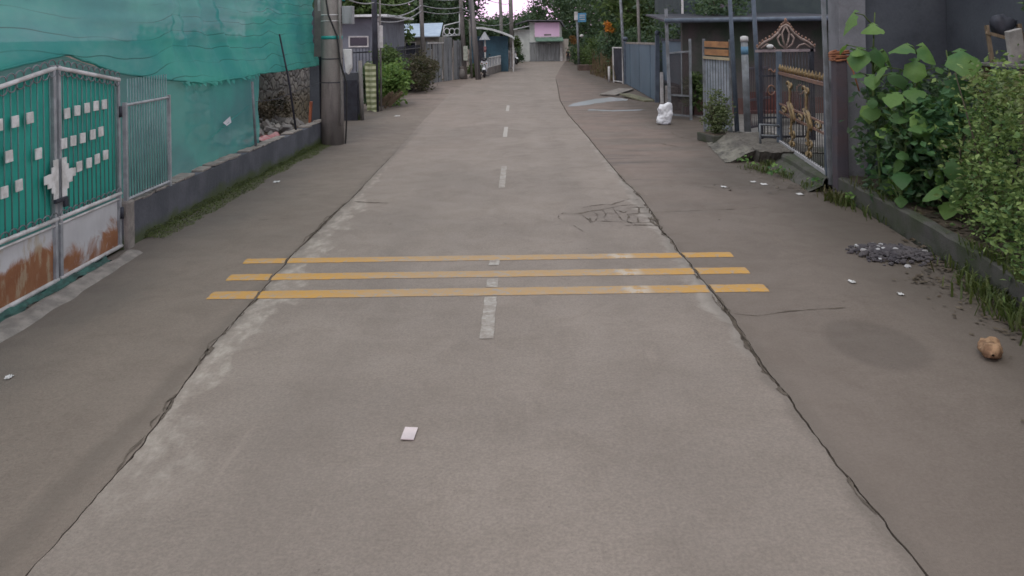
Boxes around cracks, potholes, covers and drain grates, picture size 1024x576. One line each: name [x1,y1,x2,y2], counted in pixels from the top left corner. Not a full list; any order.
crack [556,82,875,513]
crack [117,187,380,470]
